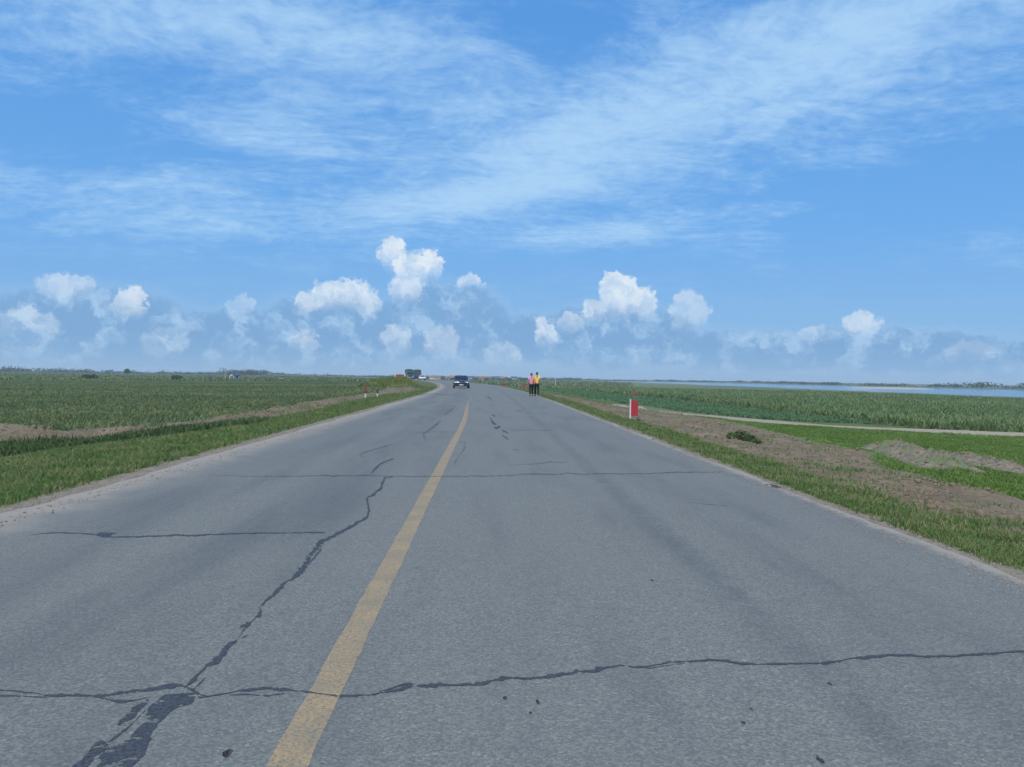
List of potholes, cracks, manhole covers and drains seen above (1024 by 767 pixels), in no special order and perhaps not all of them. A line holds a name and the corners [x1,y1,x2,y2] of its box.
crack [223,441,705,477]
